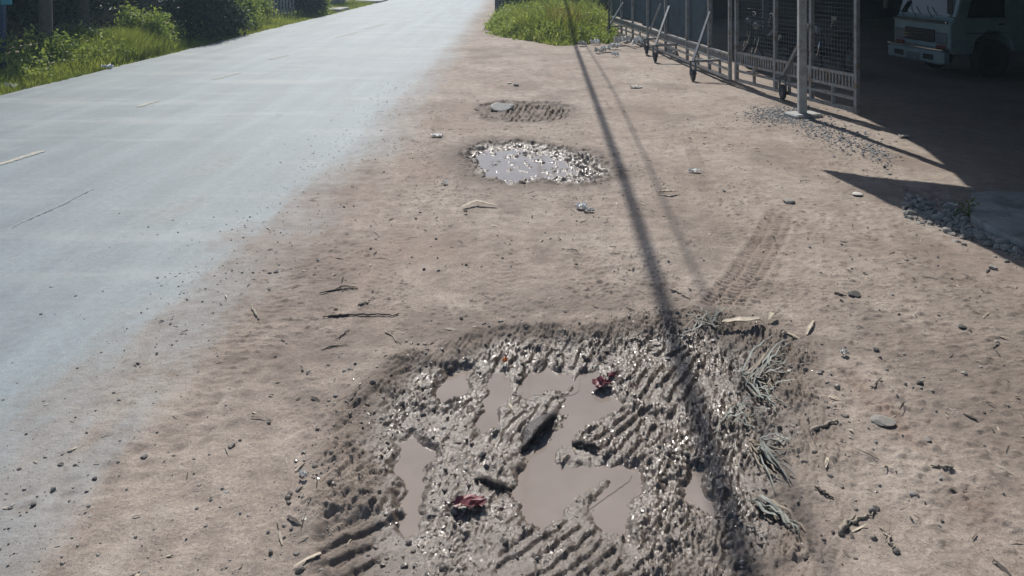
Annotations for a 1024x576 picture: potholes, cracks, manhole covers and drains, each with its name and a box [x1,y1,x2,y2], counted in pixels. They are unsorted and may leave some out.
pothole [321,307,849,576]
pothole [457,138,621,185]
pothole [474,99,580,122]
